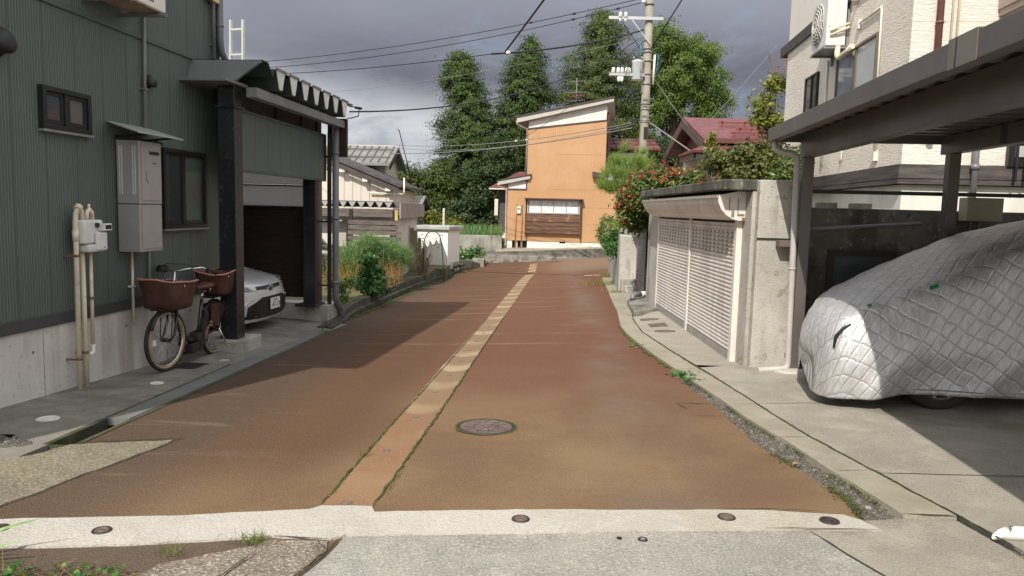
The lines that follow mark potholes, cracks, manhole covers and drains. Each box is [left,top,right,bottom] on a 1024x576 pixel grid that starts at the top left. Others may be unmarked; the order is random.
manhole cover [455,418,518,435]
